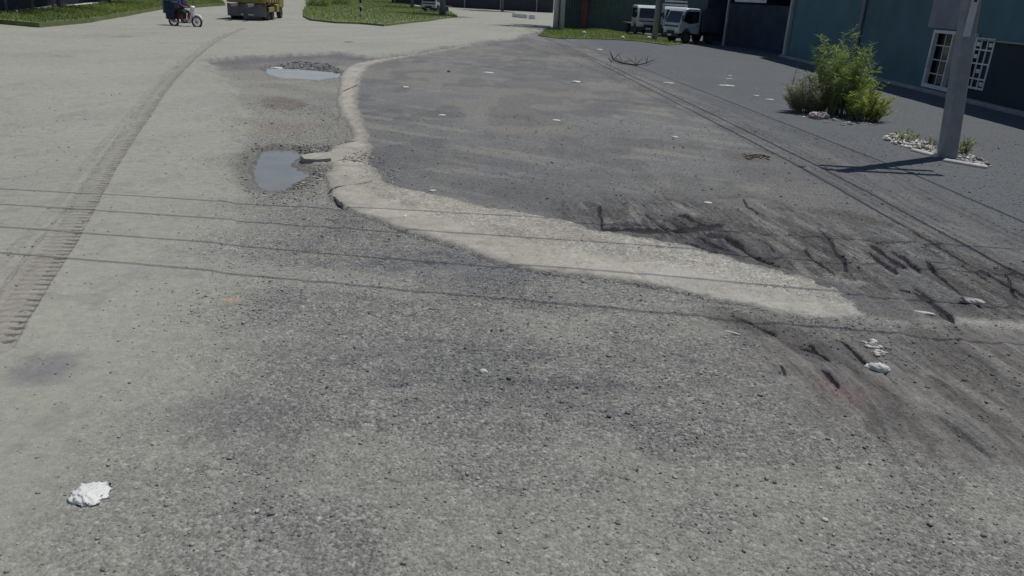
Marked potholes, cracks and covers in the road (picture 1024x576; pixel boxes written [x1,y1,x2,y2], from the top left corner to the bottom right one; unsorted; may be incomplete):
crack [327,180,375,210]
pothole [241,146,319,191]
pothole [255,61,344,80]
